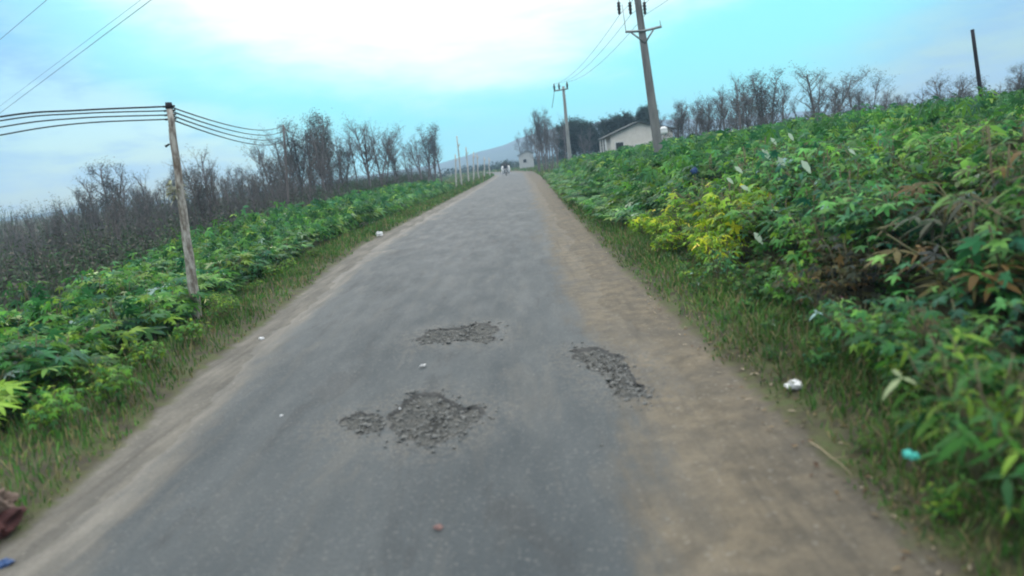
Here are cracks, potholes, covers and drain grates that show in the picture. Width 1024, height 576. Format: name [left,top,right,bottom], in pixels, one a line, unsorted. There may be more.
pothole [336,409,389,438]
pothole [374,389,499,453]
pothole [408,320,509,346]
pothole [562,341,658,411]
